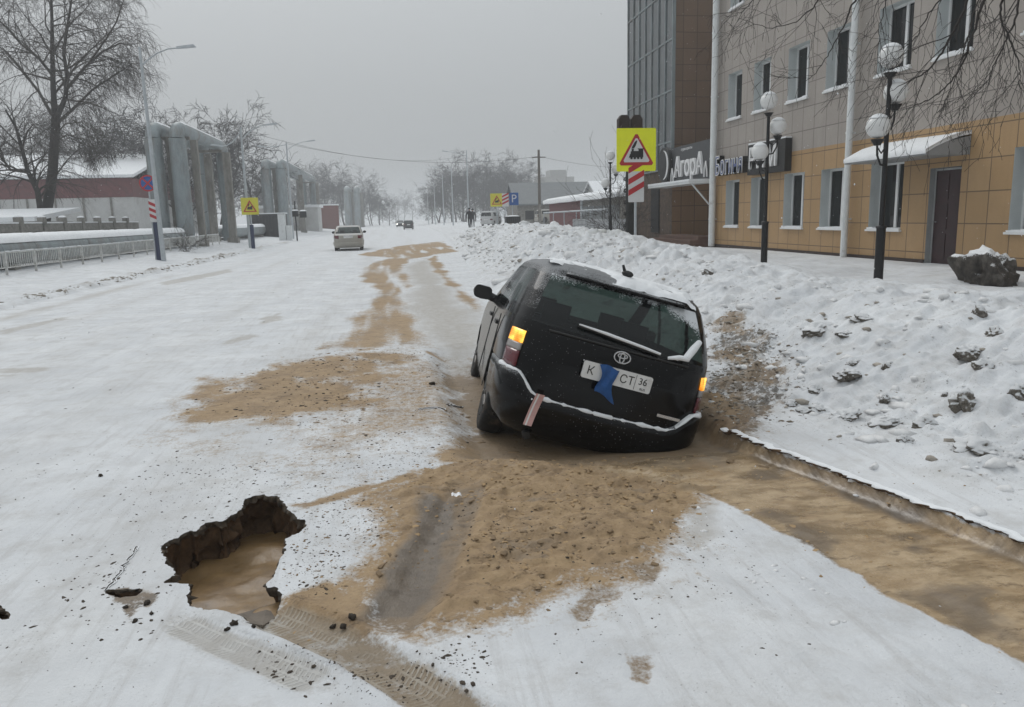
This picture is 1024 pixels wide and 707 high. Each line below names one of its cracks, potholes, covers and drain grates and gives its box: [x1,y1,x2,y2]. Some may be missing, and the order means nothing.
pothole [161,494,307,629]
crack [104,546,139,591]
